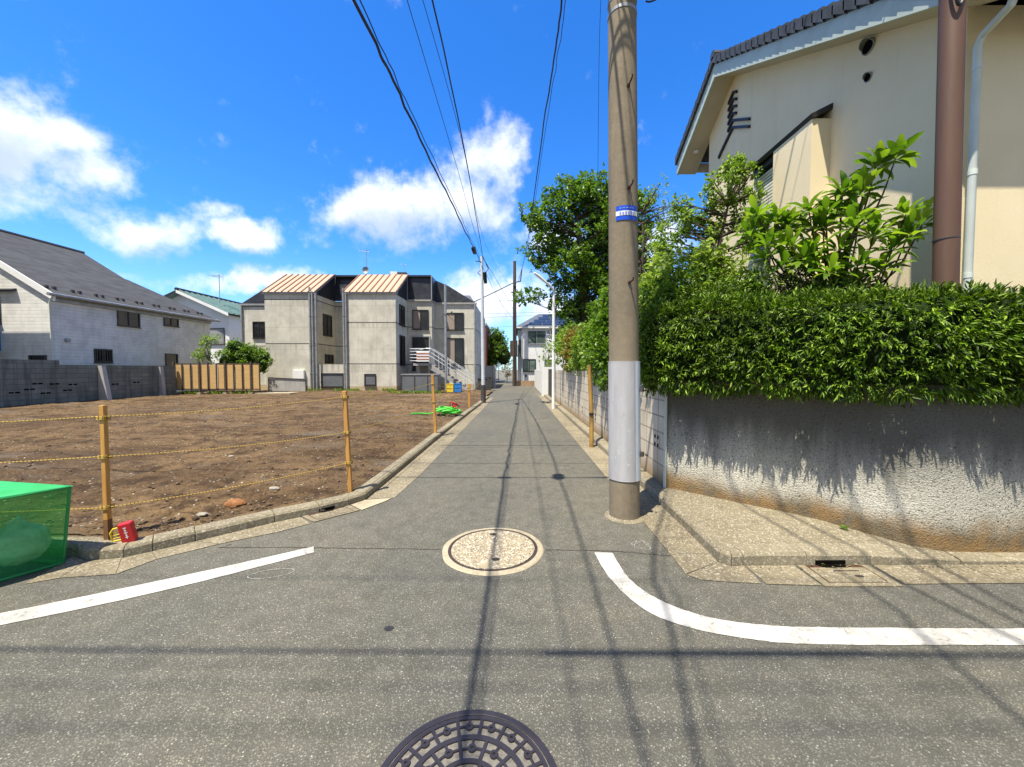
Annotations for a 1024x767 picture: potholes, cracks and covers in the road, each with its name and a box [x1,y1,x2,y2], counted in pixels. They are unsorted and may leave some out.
manhole cover [442,528,544,576]
drain grate [797,560,903,587]
manhole cover [381,709,557,767]
drain grate [302,505,360,522]
